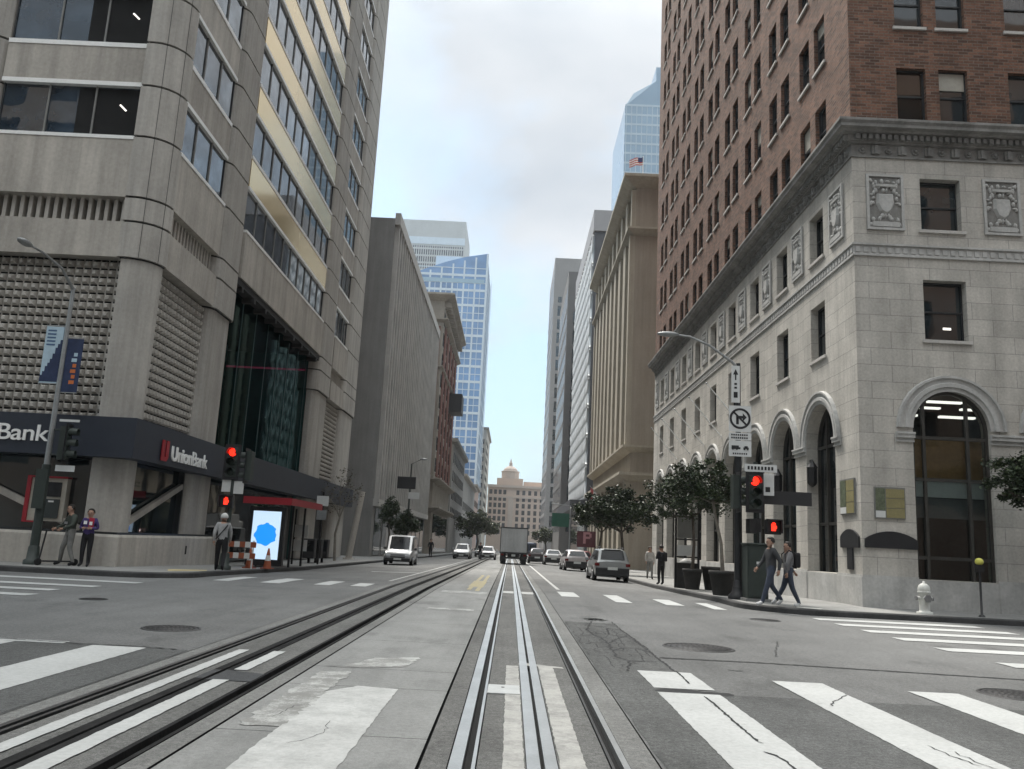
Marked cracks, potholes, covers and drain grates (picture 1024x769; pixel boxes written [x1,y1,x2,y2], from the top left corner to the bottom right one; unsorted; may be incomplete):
crack [566,621,796,769]
manhole cover [976,688,1024,701]
manhole cover [662,643,735,653]
